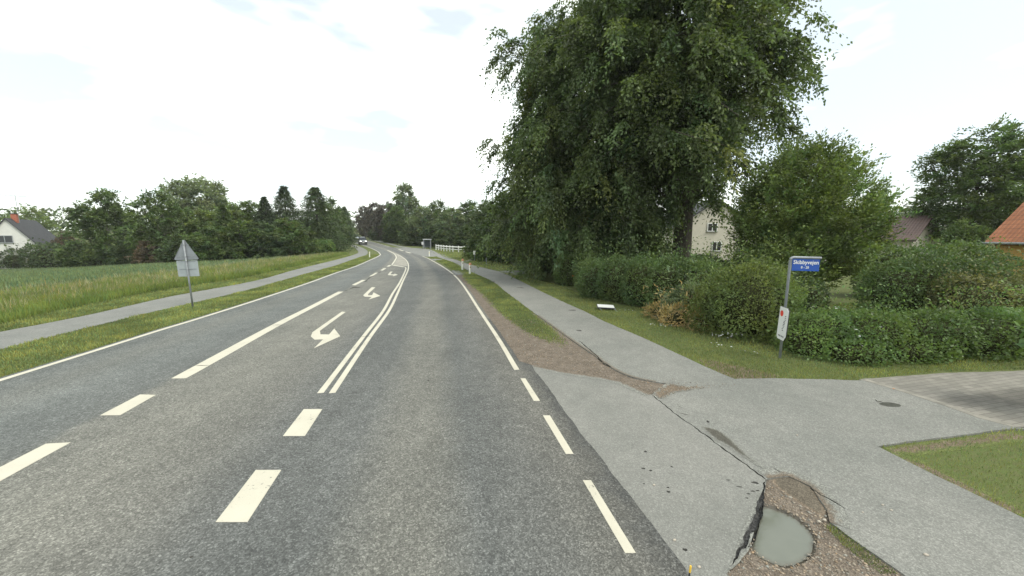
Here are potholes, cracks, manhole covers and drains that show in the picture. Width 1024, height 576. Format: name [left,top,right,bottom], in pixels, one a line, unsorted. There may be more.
crack [733,470,780,564]
pothole [751,503,817,568]
